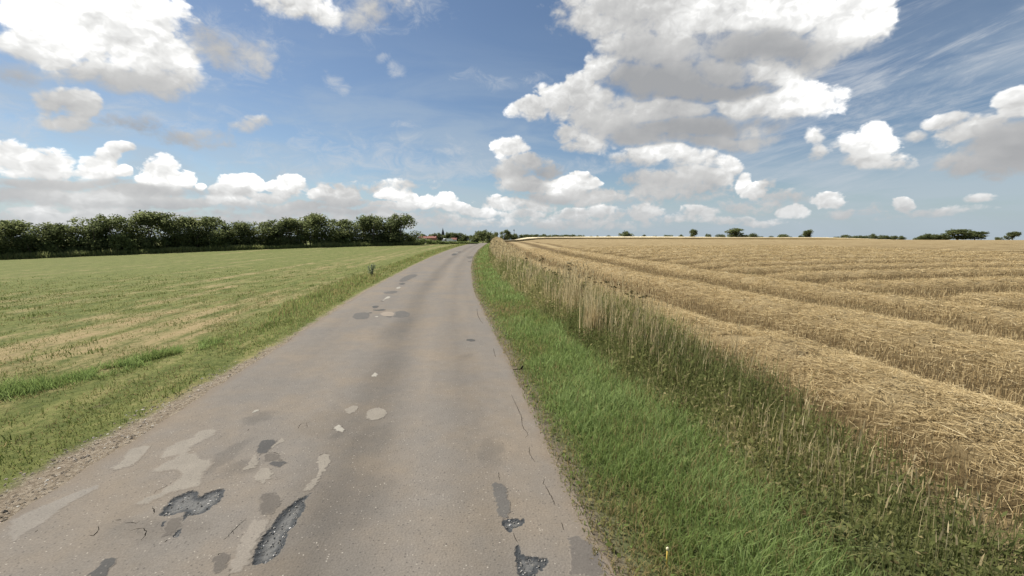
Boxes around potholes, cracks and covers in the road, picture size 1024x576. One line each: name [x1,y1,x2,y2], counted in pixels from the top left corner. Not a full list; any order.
pothole [514,545,549,576]
pothole [158,488,227,523]
pothole [251,493,312,565]
pothole [501,518,525,533]
